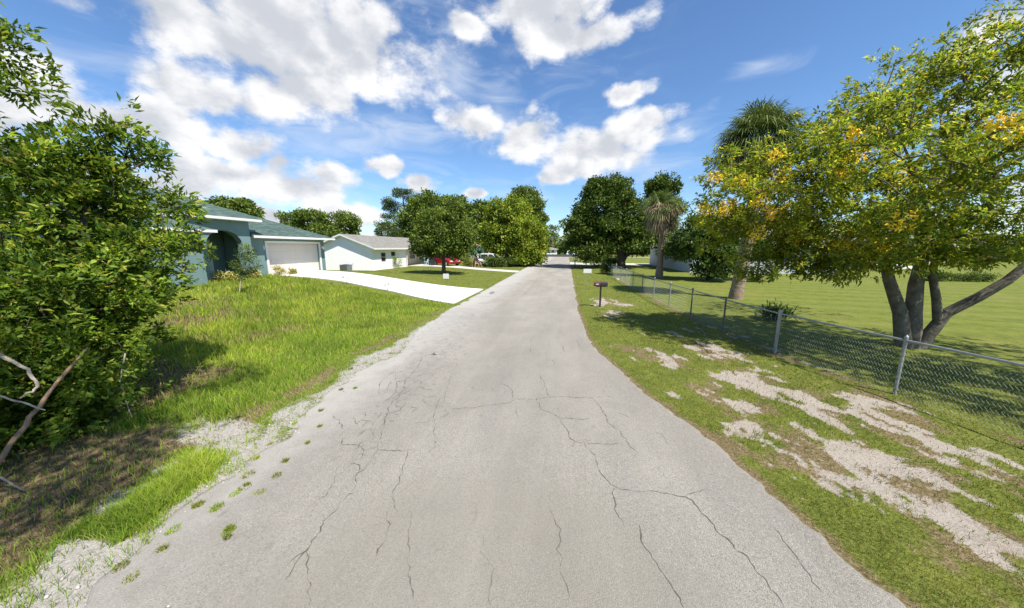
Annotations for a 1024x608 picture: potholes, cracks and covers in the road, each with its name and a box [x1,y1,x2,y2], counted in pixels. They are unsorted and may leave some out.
crack [289,334,468,606]
crack [423,359,782,602]
